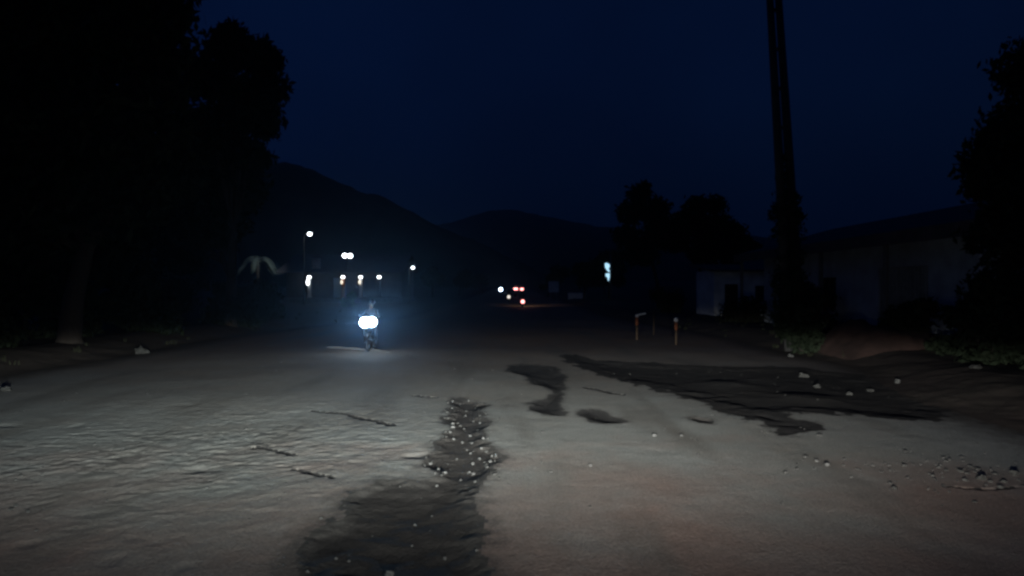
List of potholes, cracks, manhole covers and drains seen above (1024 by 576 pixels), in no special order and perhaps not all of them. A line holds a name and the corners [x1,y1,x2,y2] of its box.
pothole [559,354,958,436]
crack [582,387,626,395]
pothole [506,364,569,416]
crack [252,446,336,479]
pothole [295,397,510,576]
crack [310,410,396,426]
